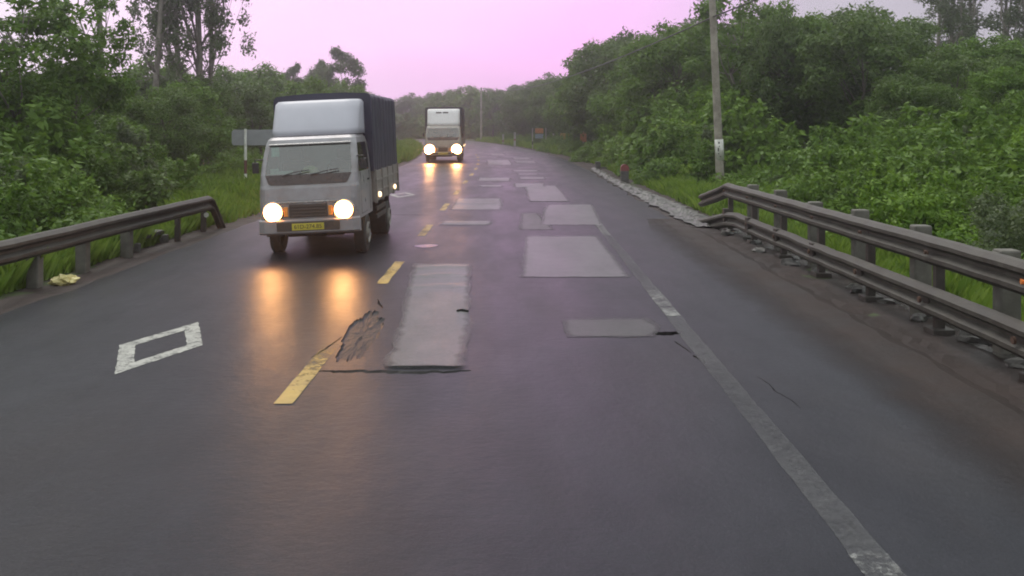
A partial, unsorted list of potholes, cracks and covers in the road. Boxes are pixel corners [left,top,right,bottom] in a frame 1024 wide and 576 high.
pothole [311,299,385,362]
crack [307,369,471,381]
